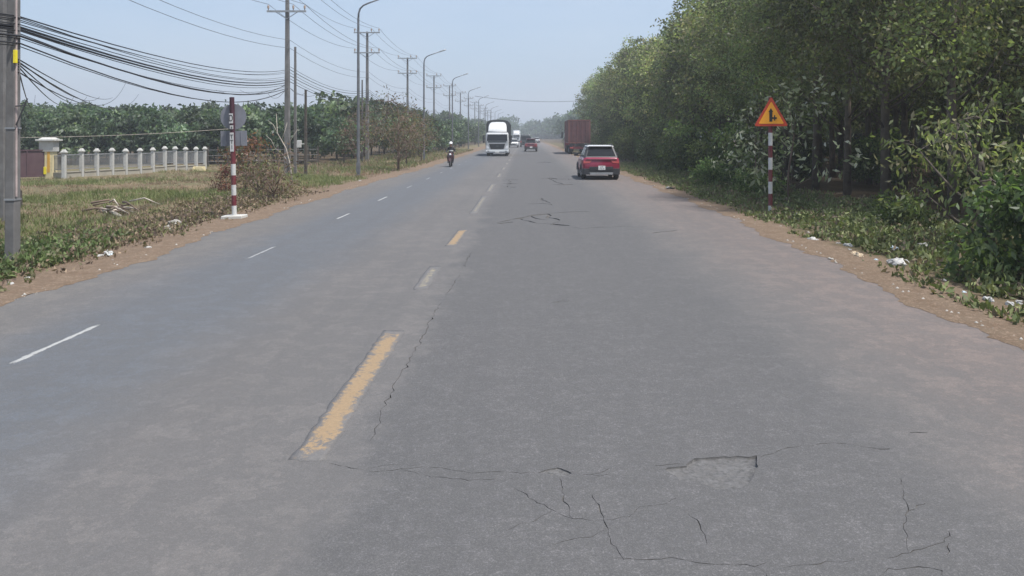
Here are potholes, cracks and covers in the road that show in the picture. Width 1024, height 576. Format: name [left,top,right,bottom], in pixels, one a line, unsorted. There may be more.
crack [370,252,472,441]
pothole [666,455,758,489]
crack [497,162,677,233]
crack [331,463,528,481]
crack [507,479,852,576]
crack [886,480,950,571]
